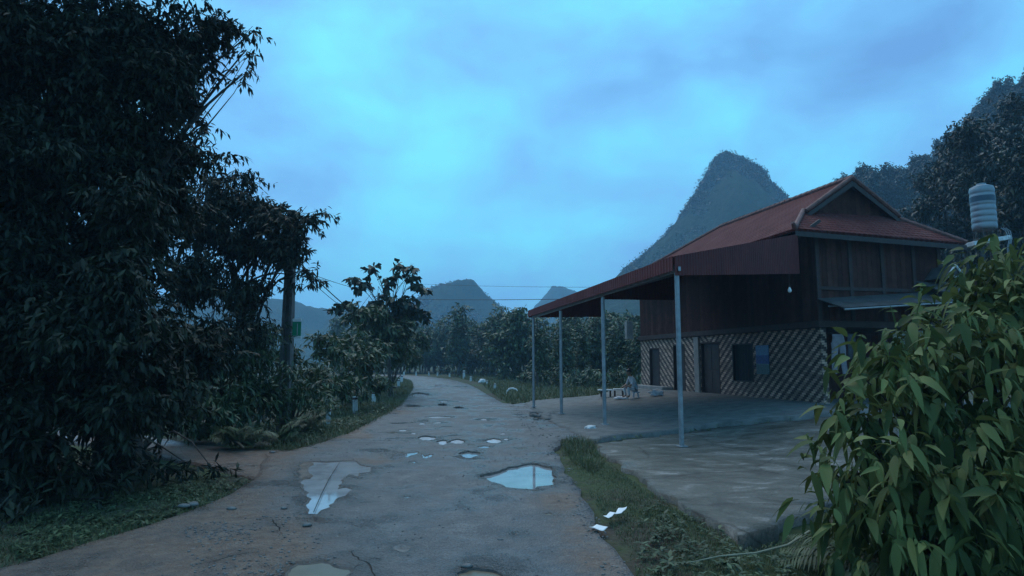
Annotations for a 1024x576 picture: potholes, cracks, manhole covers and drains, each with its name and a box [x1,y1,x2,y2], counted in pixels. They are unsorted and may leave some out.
pothole [480,463,557,489]
pothole [297,460,373,514]
crack [351,552,378,576]
pothole [390,451,419,459]
pothole [457,568,503,576]
pothole [285,561,354,576]
